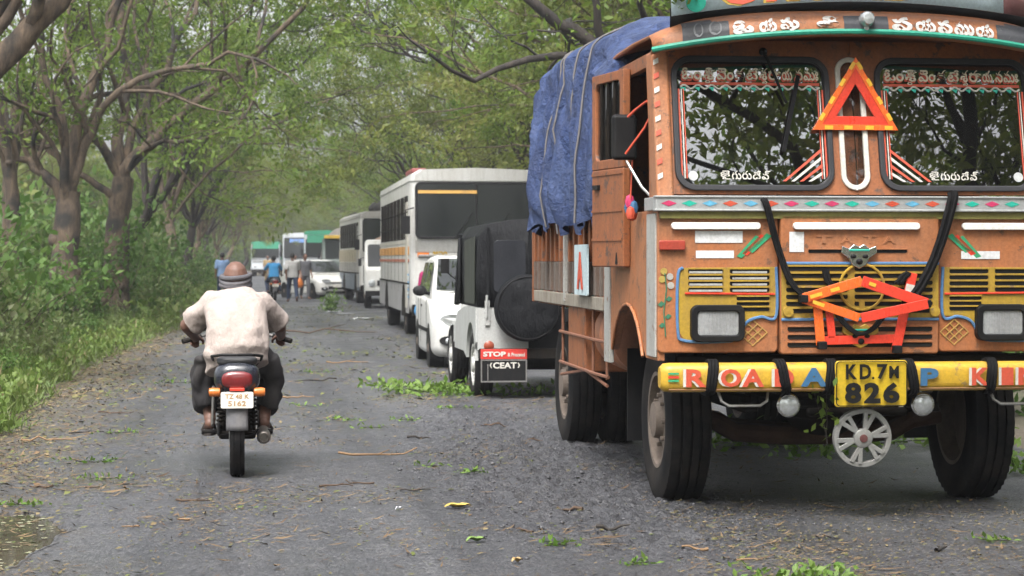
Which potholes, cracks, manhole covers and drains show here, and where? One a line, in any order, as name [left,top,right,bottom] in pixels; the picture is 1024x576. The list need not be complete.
pothole [0,509,75,571]
